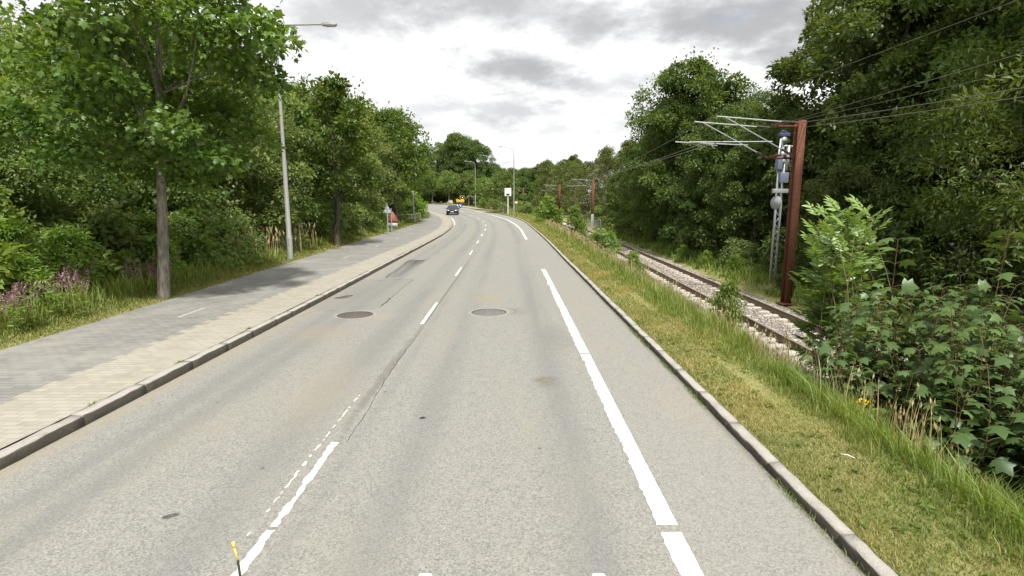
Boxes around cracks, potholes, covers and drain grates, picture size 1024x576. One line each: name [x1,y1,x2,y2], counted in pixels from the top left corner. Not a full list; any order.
crack [347,242,479,441]
manhole cover [337,311,373,319]
